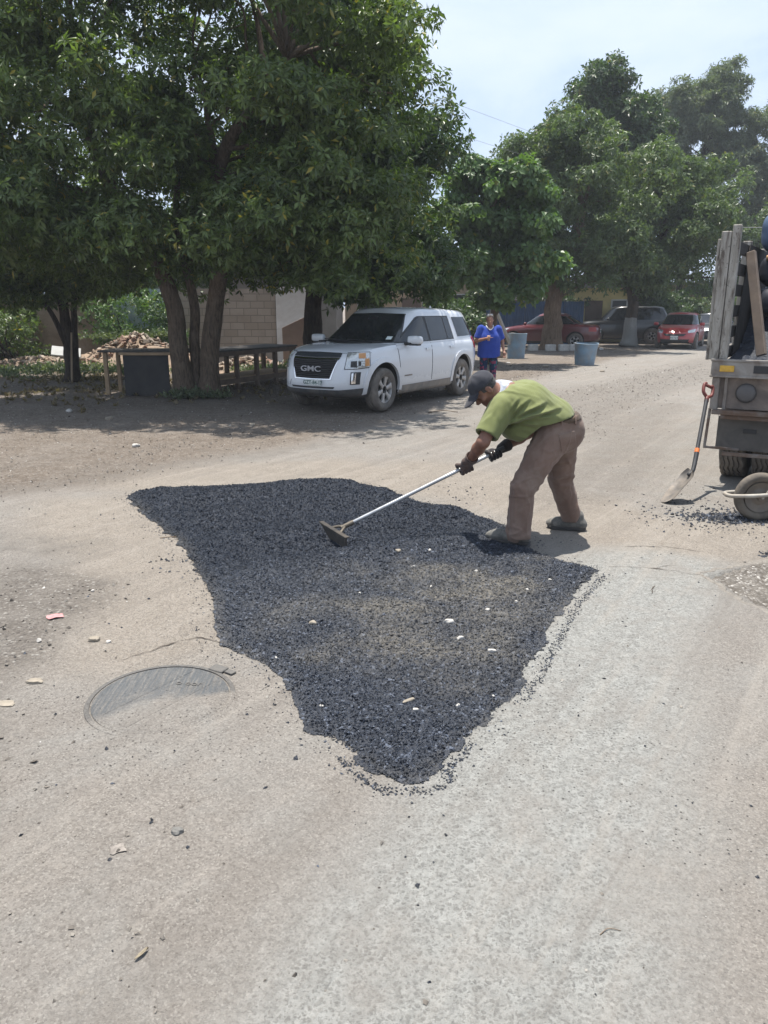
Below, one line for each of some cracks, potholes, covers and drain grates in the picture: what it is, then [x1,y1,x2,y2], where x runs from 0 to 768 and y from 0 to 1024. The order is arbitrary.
manhole cover [83,664,236,738]
